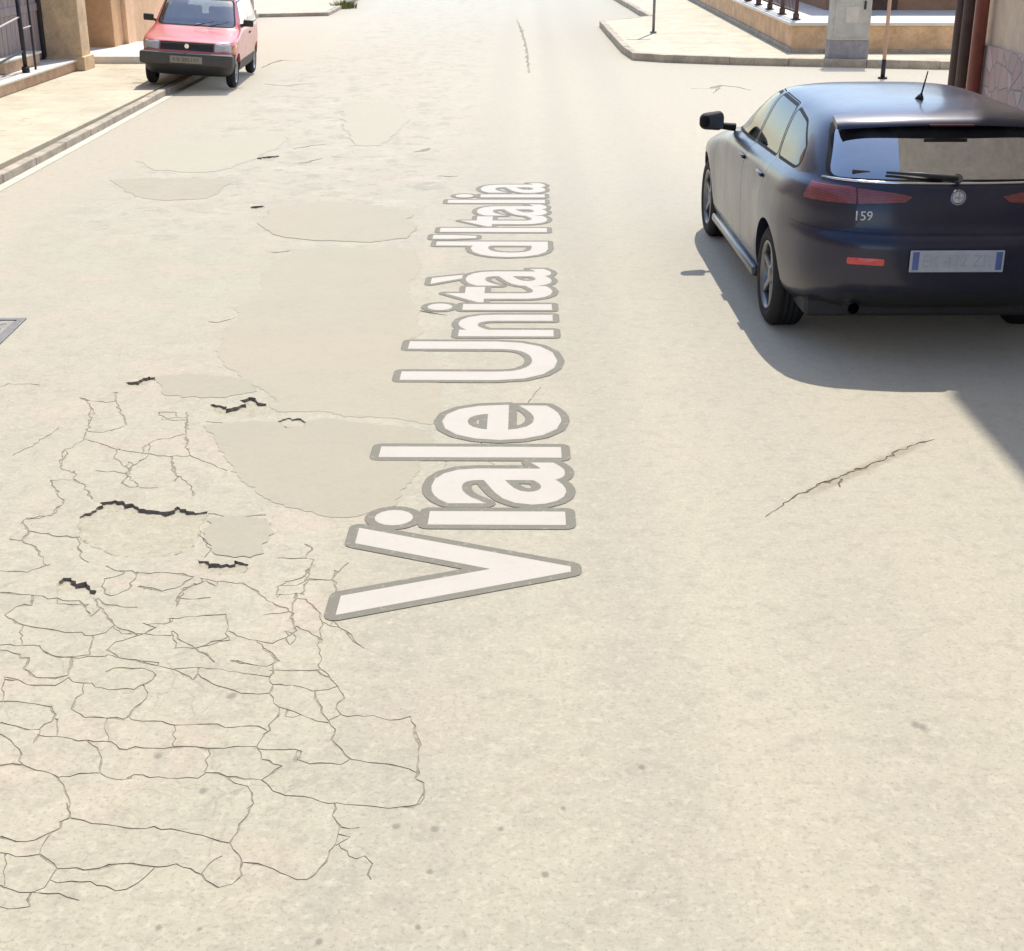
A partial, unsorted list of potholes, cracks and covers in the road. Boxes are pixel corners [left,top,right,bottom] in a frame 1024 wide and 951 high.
crack [710,85,748,93]
crack [0,383,425,909]
manhole cover [0,318,27,344]
crack [517,21,530,73]
crack [765,439,934,517]
